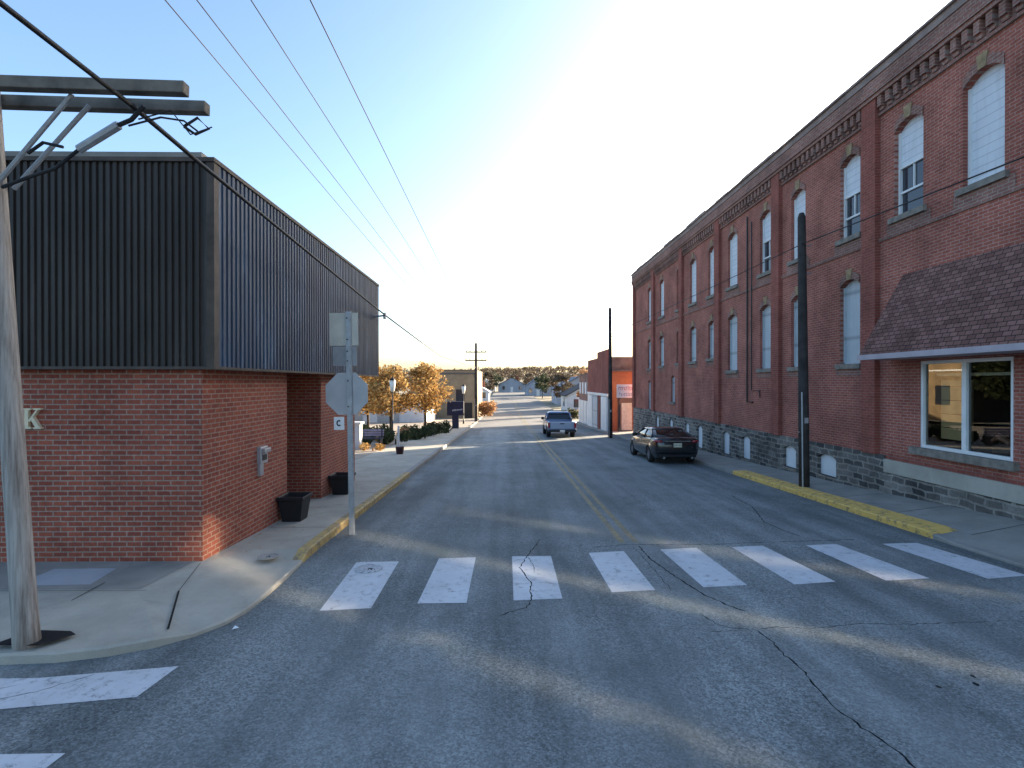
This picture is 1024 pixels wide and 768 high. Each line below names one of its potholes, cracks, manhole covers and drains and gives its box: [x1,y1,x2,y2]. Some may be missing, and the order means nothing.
manhole cover [355,564,383,573]
crack [500,539,540,616]
crack [599,496,1001,768]
